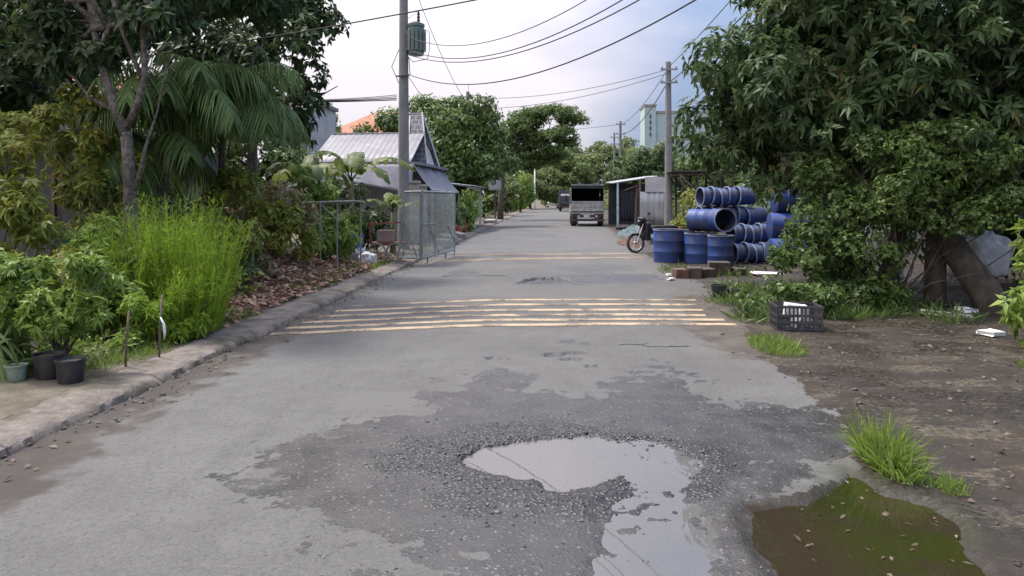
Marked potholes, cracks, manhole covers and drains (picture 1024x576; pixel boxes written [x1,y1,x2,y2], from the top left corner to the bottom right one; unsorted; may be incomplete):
pothole [436,428,644,501]
